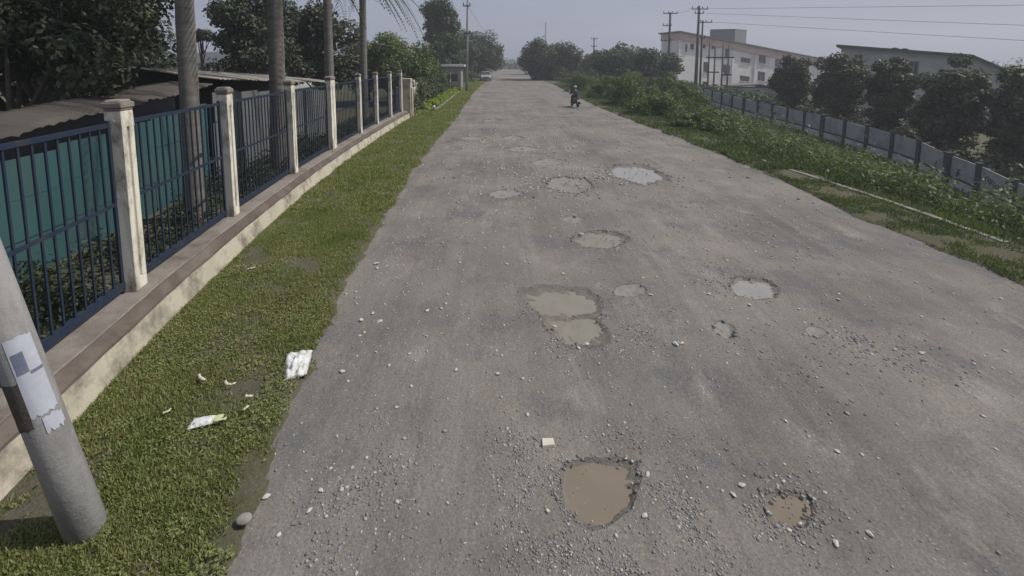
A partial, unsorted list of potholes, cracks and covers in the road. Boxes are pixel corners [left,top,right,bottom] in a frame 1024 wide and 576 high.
pothole [762,489,816,530]
pothole [568,230,633,250]
pothole [485,189,525,199]
pothole [611,283,647,297]
pothole [804,326,829,339]
pothole [606,163,672,186]
pothole [557,456,643,531]
pothole [514,284,611,350]
pothole [712,320,736,339]
pothole [544,176,594,194]
pothole [727,275,781,300]
